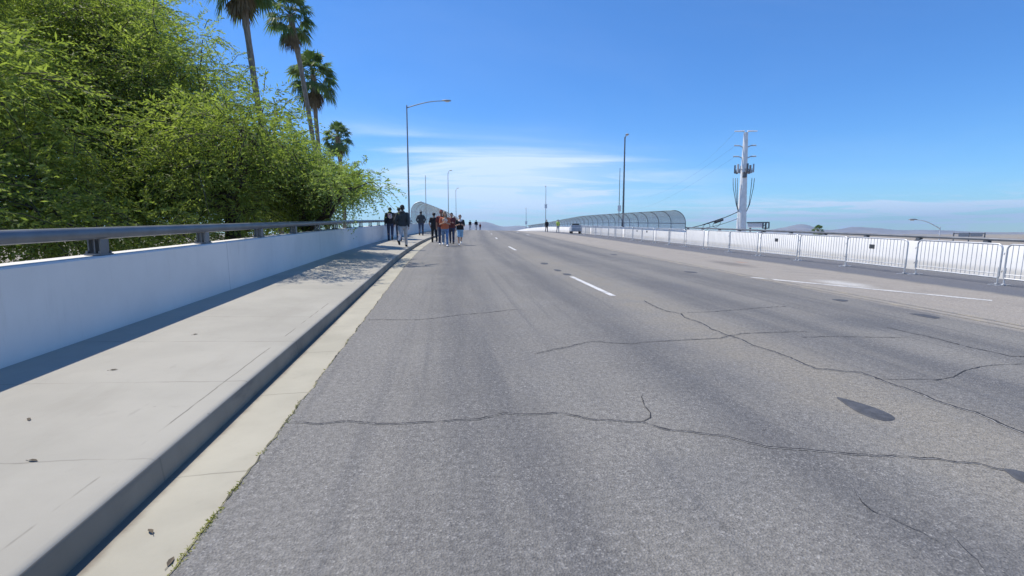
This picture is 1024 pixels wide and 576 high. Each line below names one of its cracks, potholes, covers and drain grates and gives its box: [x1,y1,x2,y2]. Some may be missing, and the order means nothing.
crack [291,394,1003,470]
crack [854,490,987,572]
crack [535,300,1024,433]
